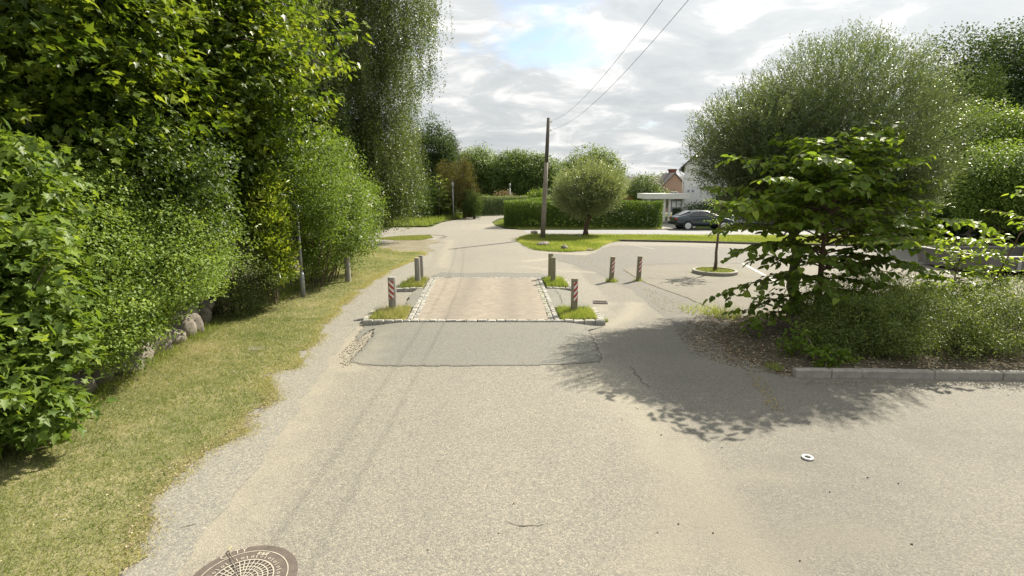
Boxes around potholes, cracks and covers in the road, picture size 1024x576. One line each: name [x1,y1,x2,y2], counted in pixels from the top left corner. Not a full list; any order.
manhole cover [193,545,298,576]
